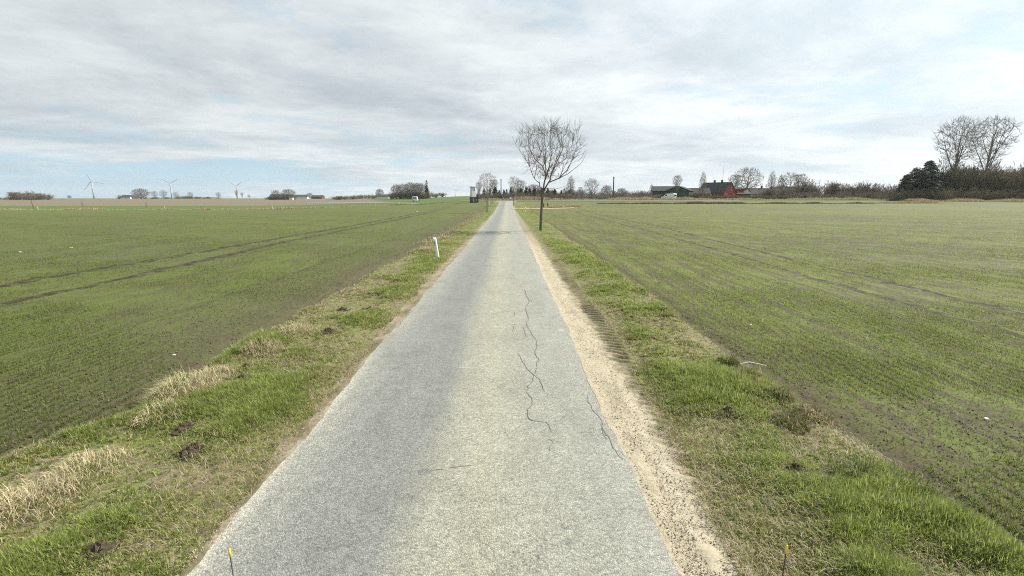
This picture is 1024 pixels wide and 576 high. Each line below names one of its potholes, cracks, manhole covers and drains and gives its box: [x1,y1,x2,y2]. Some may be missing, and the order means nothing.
crack [512,289,553,443]
